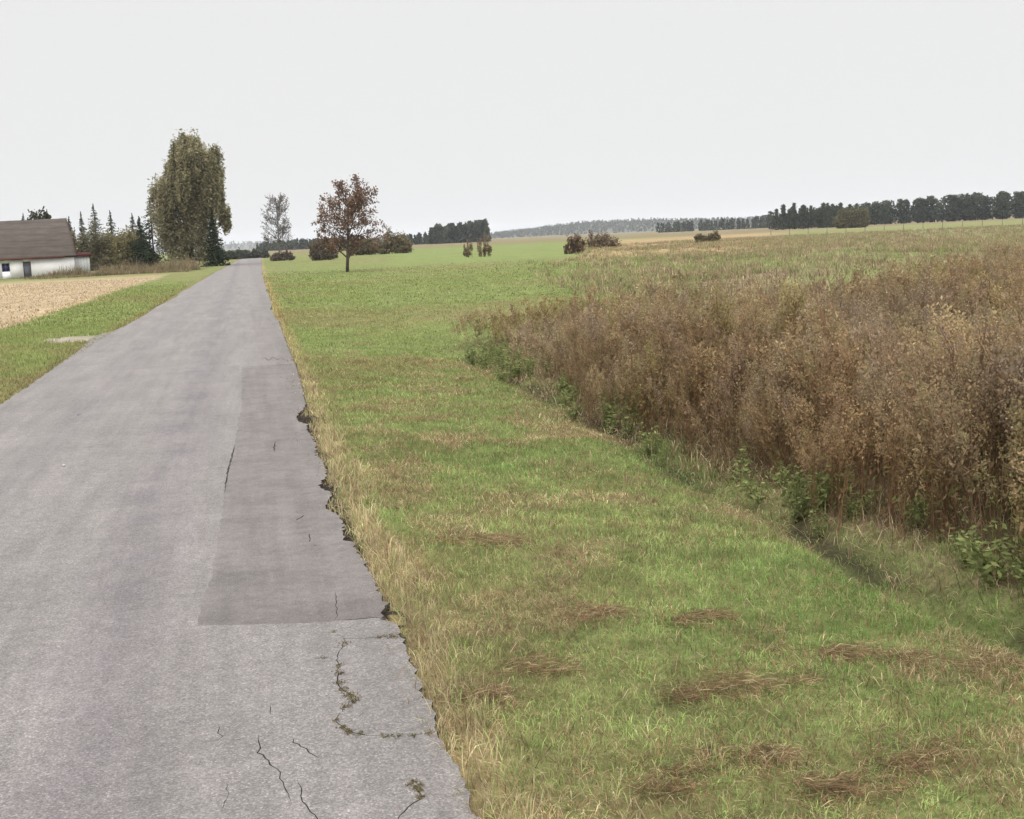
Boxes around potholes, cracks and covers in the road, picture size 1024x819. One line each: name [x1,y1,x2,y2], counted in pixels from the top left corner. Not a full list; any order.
crack [204,727,318,819]
crack [314,594,440,739]
